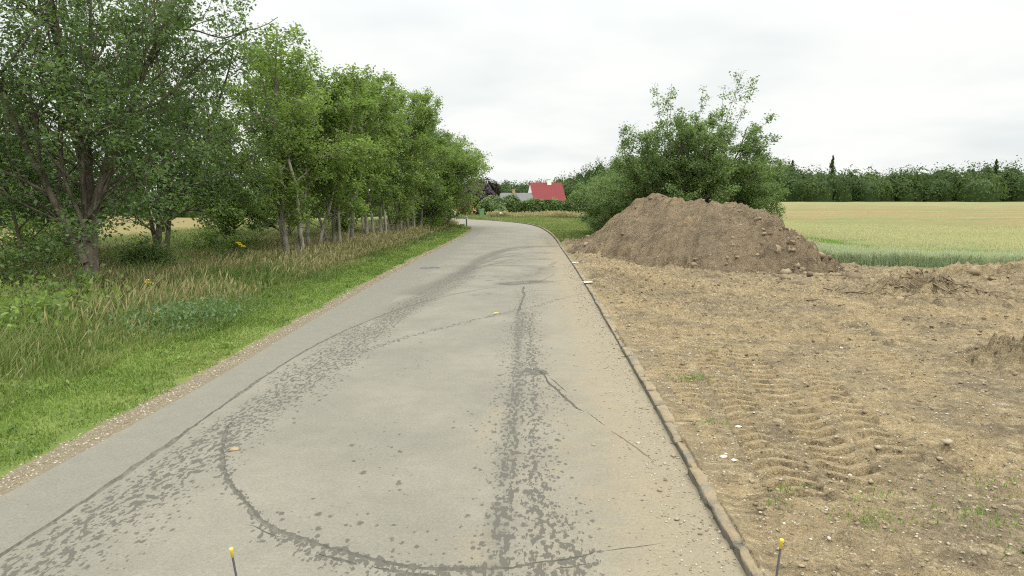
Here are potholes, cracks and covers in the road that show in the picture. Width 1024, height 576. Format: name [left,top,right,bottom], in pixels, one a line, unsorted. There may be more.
crack [219,368,655,576]
